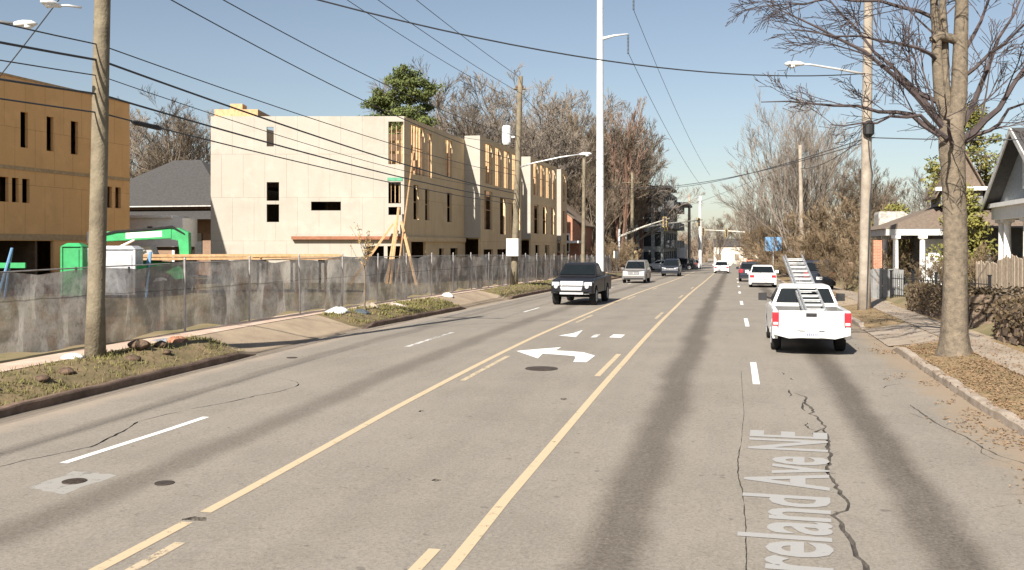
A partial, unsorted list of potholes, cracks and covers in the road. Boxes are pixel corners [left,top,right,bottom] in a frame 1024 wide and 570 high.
crack [775,368,1024,570]
manhole cover [29,471,116,494]
crack [0,412,176,467]
